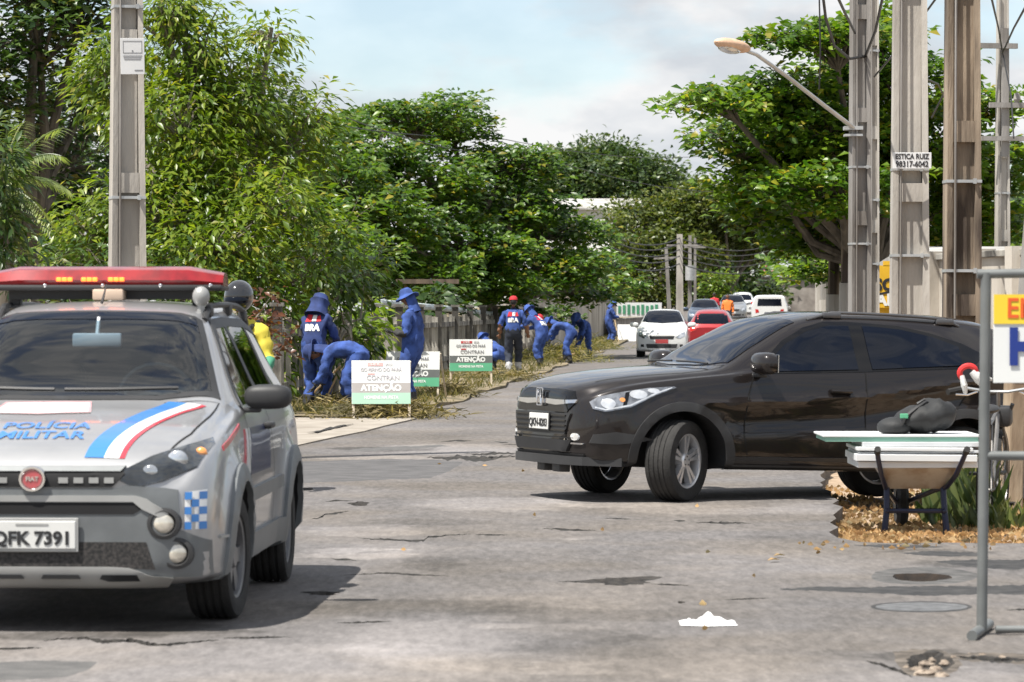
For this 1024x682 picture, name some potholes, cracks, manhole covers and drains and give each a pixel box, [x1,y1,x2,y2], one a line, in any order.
crack [427,440,516,462]
pothole [906,650,955,670]
crack [0,636,292,650]
crack [313,499,352,519]
manhole cover [876,602,968,611]
crack [331,534,503,576]
pothole [578,576,662,586]
